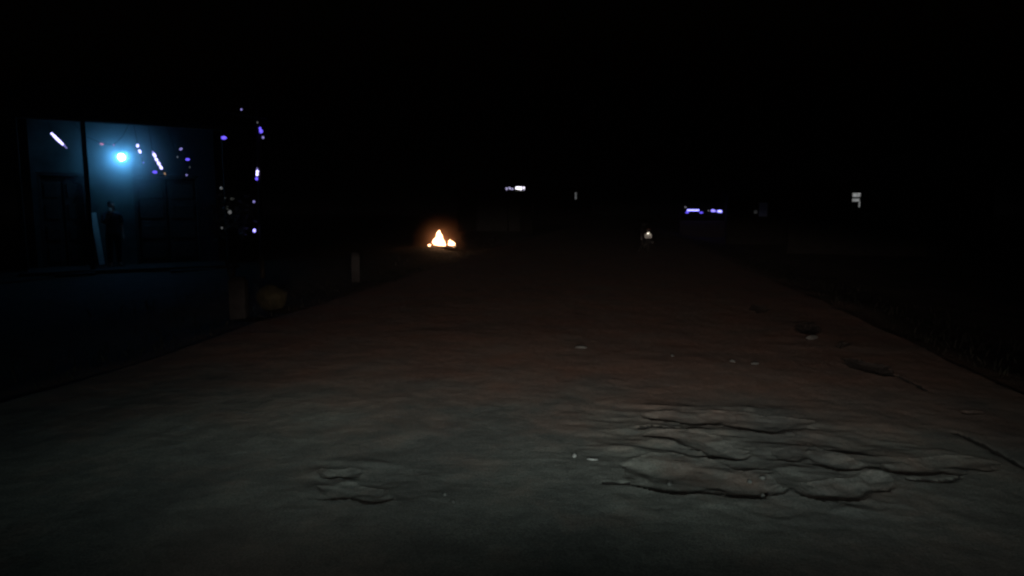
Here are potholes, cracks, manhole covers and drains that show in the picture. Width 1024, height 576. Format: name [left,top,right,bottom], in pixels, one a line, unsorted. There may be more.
crack [898,377,928,392]
crack [905,432,1024,483]
pothole [794,322,822,334]
